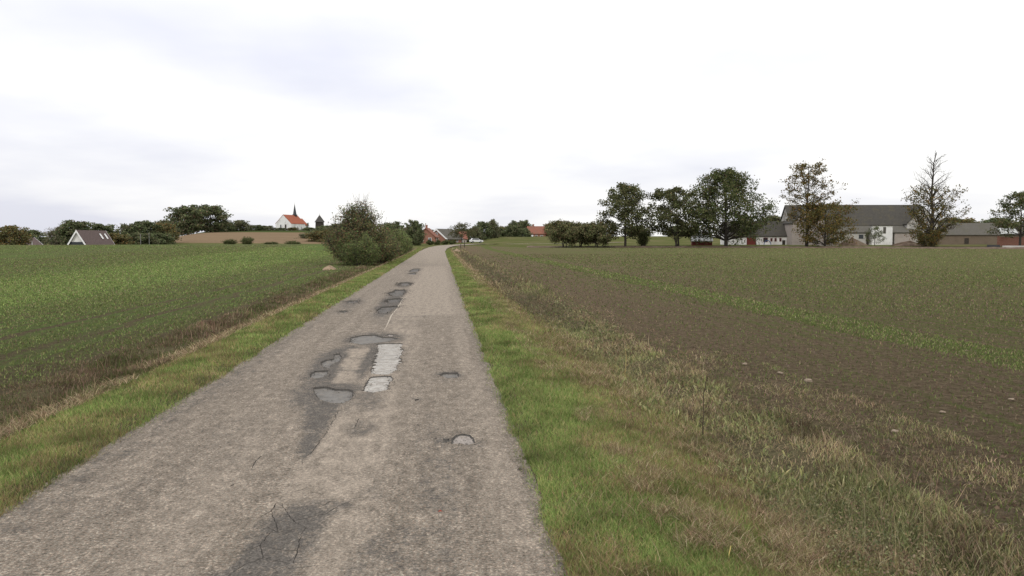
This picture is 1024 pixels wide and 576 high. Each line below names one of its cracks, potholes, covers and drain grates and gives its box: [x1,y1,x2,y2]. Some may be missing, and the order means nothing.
pothole [306,369,331,380]
pothole [441,432,483,446]
pothole [305,385,356,405]
pothole [437,370,460,378]
pothole [373,305,405,314]
pothole [320,352,346,368]
pothole [384,289,410,297]
pothole [346,334,398,345]
crack [228,489,348,576]
